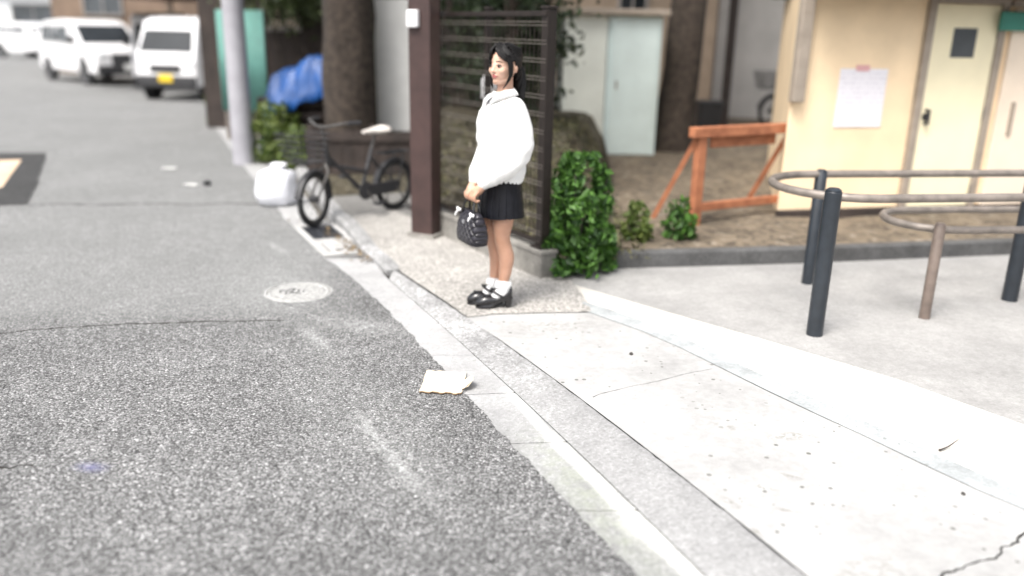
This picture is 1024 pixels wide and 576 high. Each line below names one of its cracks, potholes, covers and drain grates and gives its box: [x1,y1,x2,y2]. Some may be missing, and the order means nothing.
crack [940,532,1024,576]
drain grate [293,222,361,258]
manhole cover [264,282,333,303]
